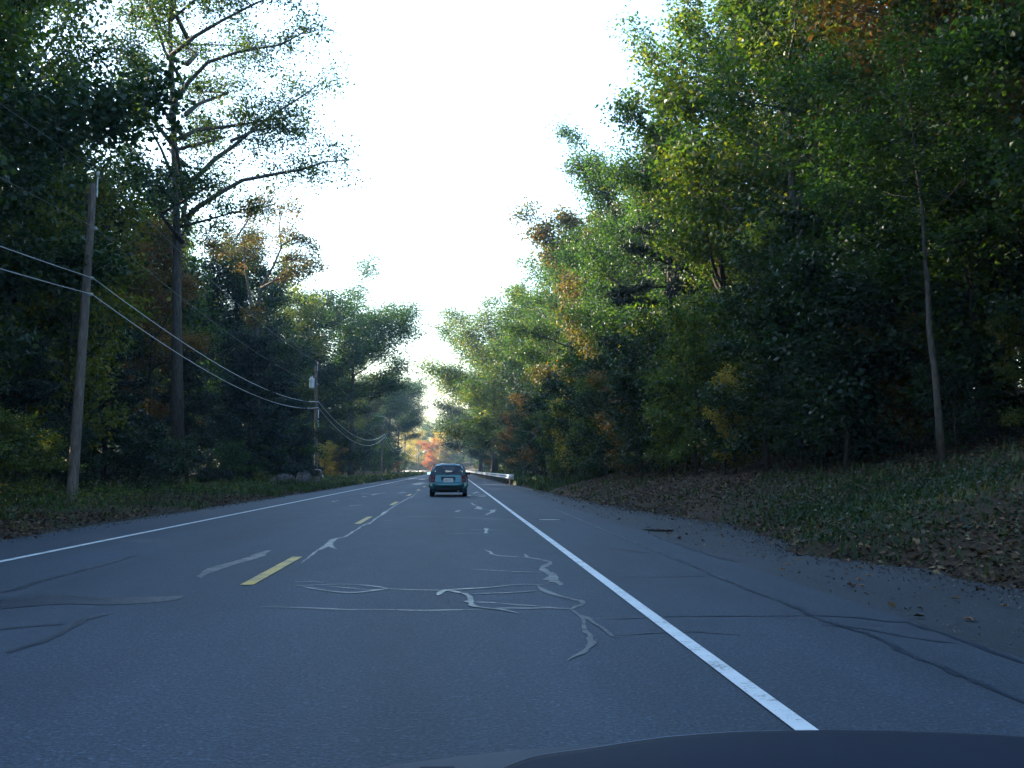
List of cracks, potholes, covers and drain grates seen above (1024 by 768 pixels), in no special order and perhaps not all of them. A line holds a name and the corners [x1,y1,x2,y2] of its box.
crack [2,613,111,653]
crack [297,512,1024,703]
